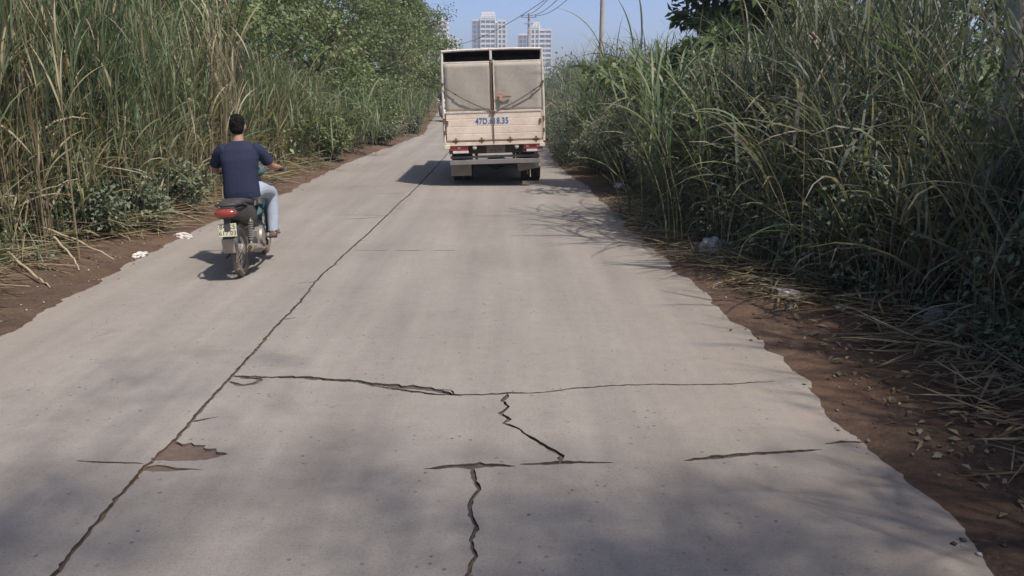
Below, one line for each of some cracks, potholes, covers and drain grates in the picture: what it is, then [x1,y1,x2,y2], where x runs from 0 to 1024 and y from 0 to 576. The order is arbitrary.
pothole [151,442,227,462]
crack [50,152,771,576]
crack [684,440,861,461]
